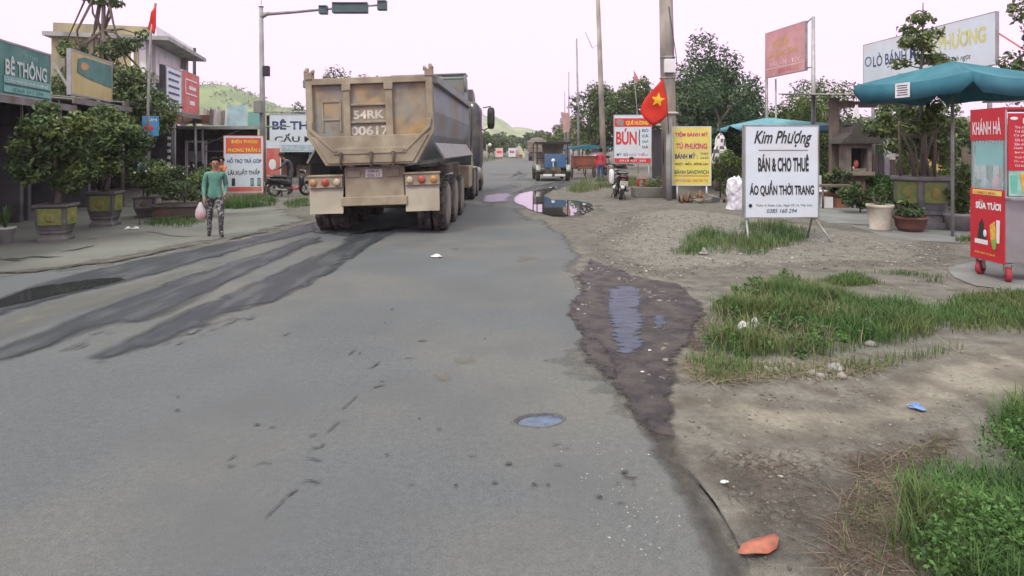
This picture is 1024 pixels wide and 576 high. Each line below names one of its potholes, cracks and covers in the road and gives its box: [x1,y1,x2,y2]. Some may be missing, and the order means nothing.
crack [264,479,319,518]
crack [307,394,357,459]
